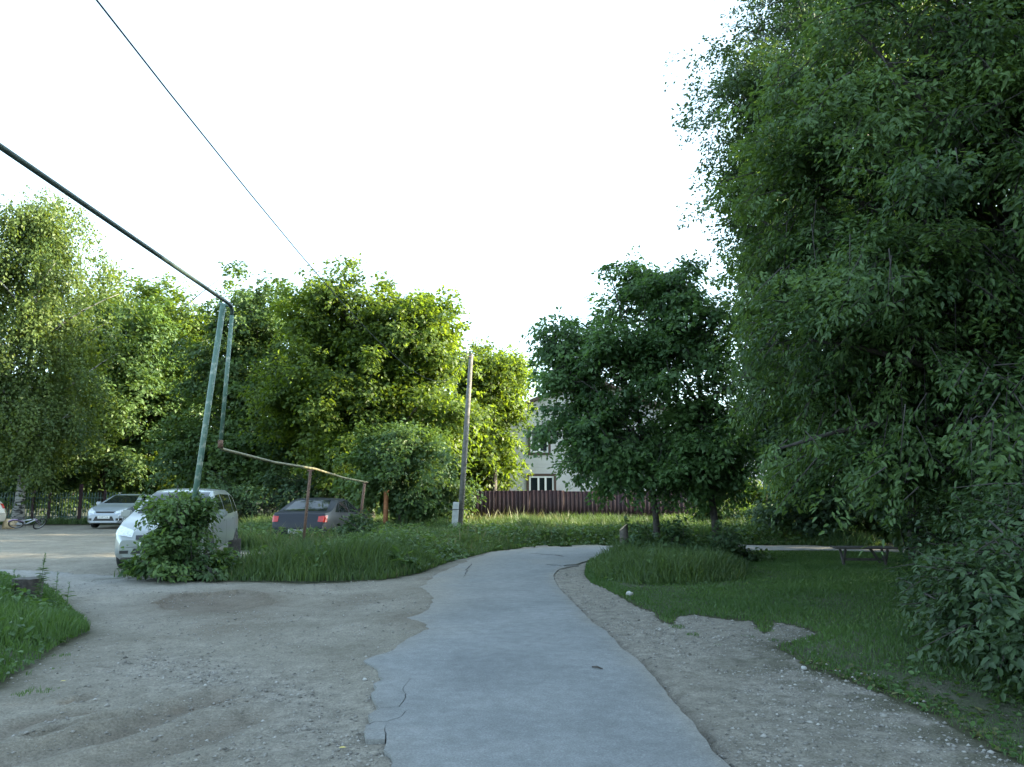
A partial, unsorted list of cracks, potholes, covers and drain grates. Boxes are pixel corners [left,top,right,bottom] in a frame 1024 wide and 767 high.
pothole [159,590,277,612]
